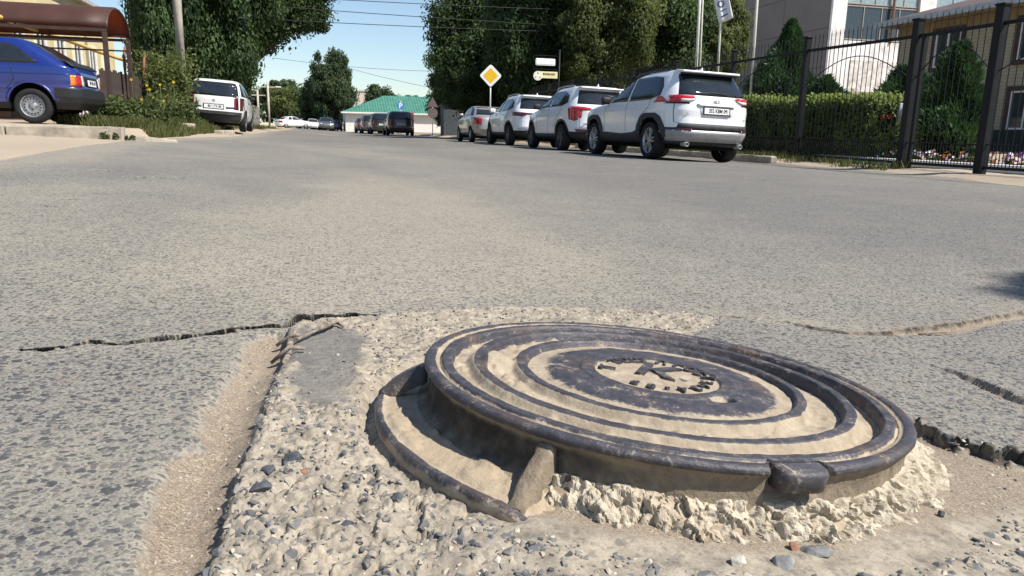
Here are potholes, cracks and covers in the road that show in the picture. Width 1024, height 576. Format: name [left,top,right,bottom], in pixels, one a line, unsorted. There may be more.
crack [718,309,1024,336]
pothole [136,334,295,576]
manhole cover [374,322,954,545]
crack [931,365,1024,405]
crack [18,313,375,352]
